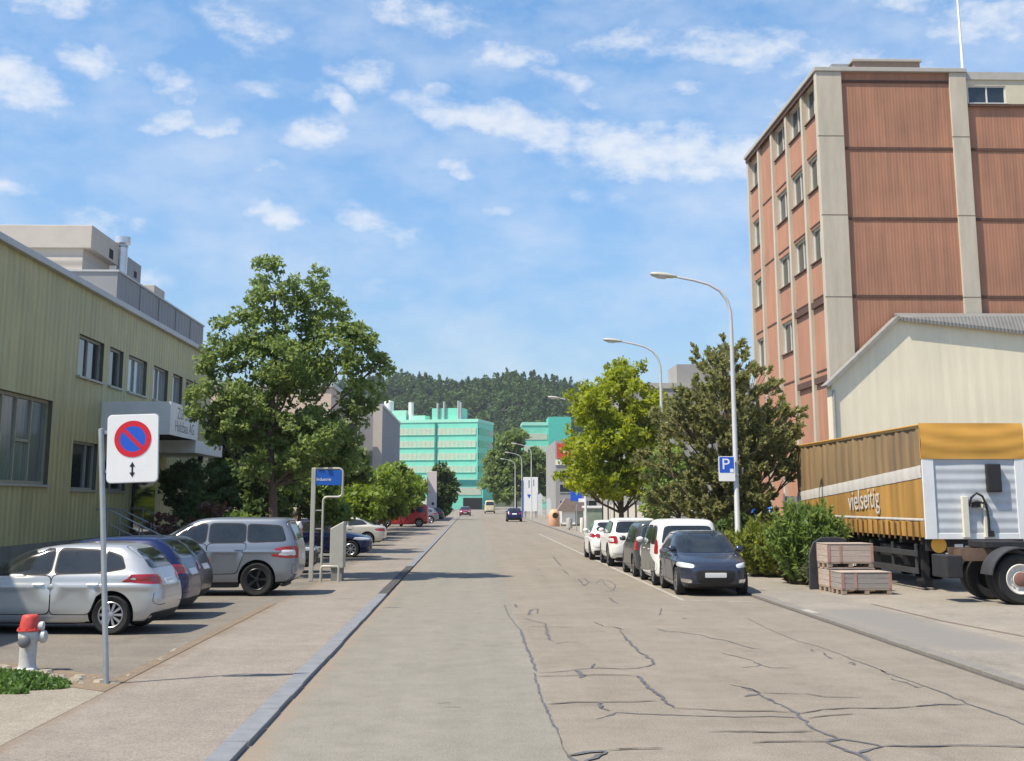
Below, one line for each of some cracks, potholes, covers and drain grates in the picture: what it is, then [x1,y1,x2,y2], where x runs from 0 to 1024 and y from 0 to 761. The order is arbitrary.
crack [536,557,618,604]
crack [597,685,1024,761]
crack [514,604,563,644]
crack [659,608,771,668]
